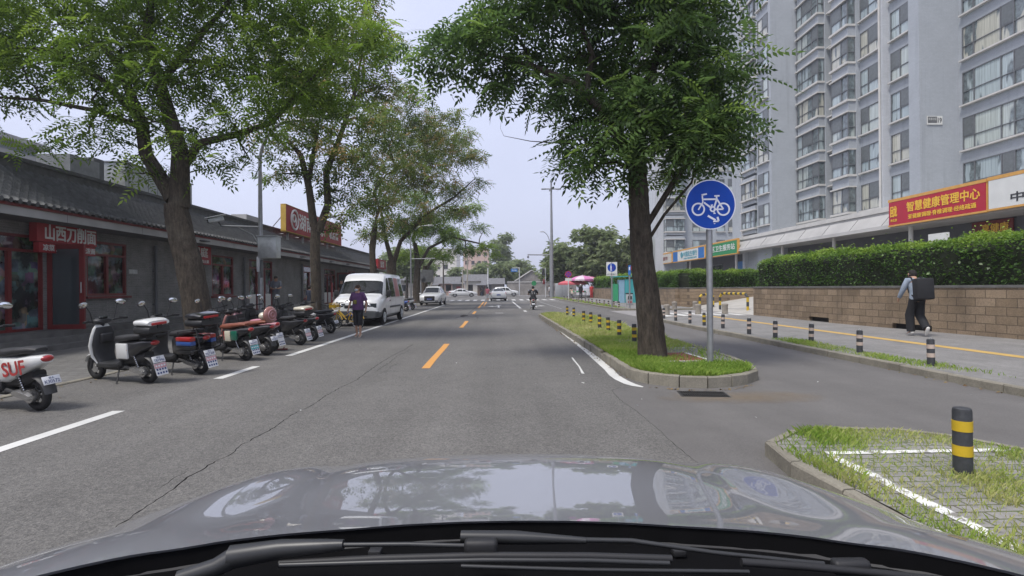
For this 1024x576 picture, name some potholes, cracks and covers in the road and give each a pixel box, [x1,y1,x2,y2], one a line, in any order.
crack [116,345,412,527]
